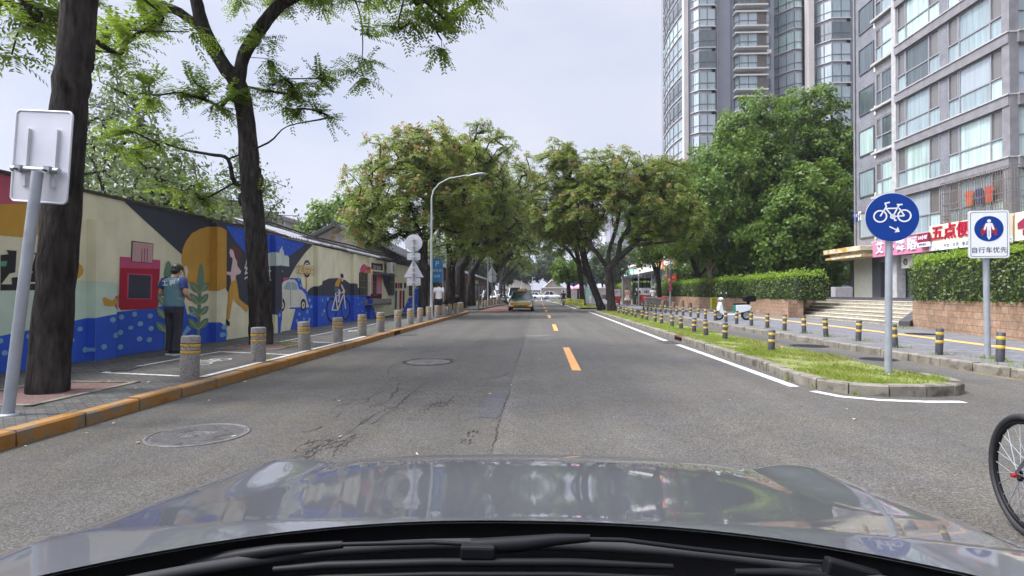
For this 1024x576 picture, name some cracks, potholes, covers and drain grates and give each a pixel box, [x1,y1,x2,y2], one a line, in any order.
manhole cover [142,423,251,448]
crack [292,329,528,459]
